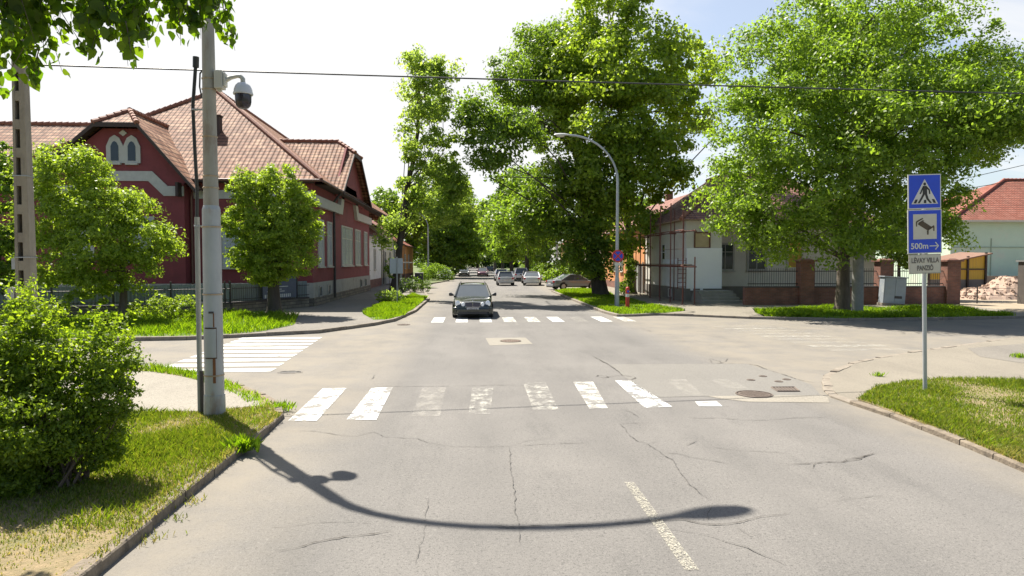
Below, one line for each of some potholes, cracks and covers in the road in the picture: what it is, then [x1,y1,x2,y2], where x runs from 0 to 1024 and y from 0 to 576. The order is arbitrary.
manhole cover [486,337,532,345]
crack [292,410,873,561]
manhole cover [735,390,773,398]
